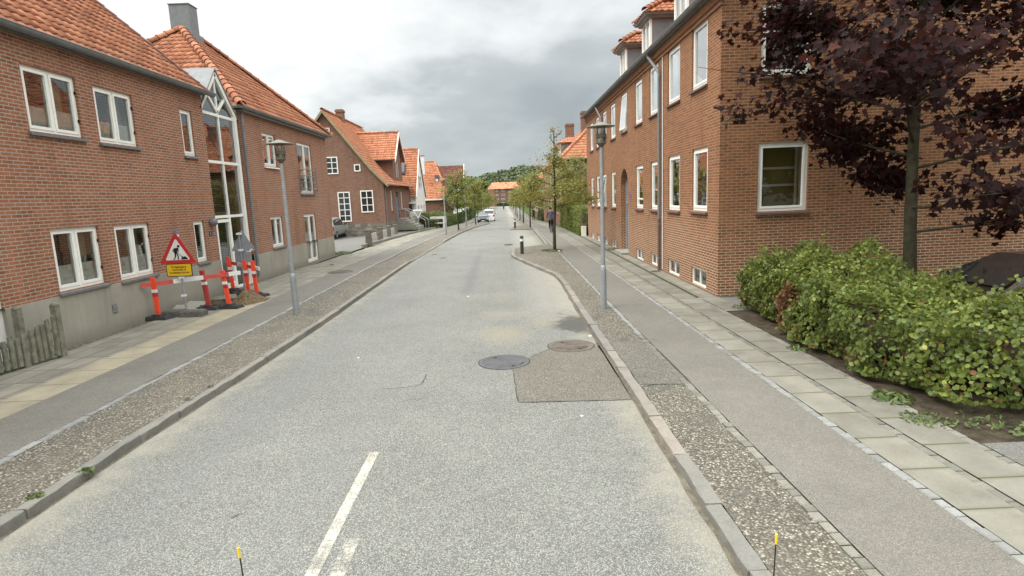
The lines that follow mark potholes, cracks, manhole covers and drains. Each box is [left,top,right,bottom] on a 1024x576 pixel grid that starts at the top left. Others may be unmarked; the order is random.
manhole cover [547,340,595,352]
manhole cover [478,355,530,370]
